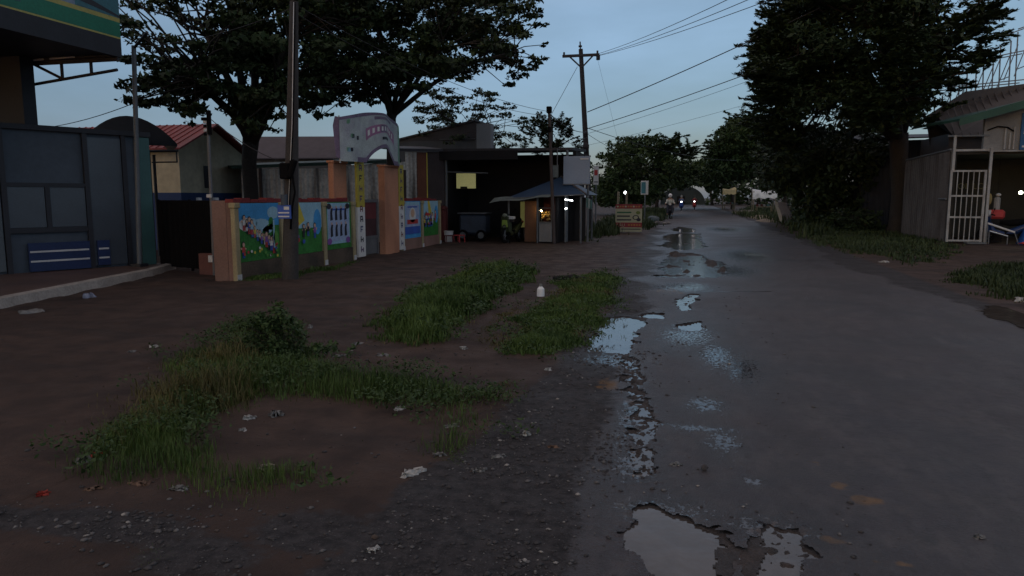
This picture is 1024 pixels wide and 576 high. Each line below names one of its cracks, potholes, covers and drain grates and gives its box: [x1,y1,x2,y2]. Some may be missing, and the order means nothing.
pothole [713,524,823,576]
pothole [674,294,701,311]
pothole [656,233,709,250]
pothole [653,251,728,278]
pothole [633,312,665,321]
pothole [617,353,664,478]
pothole [617,502,768,576]
pothole [584,316,648,359]
pothole [675,321,706,331]
